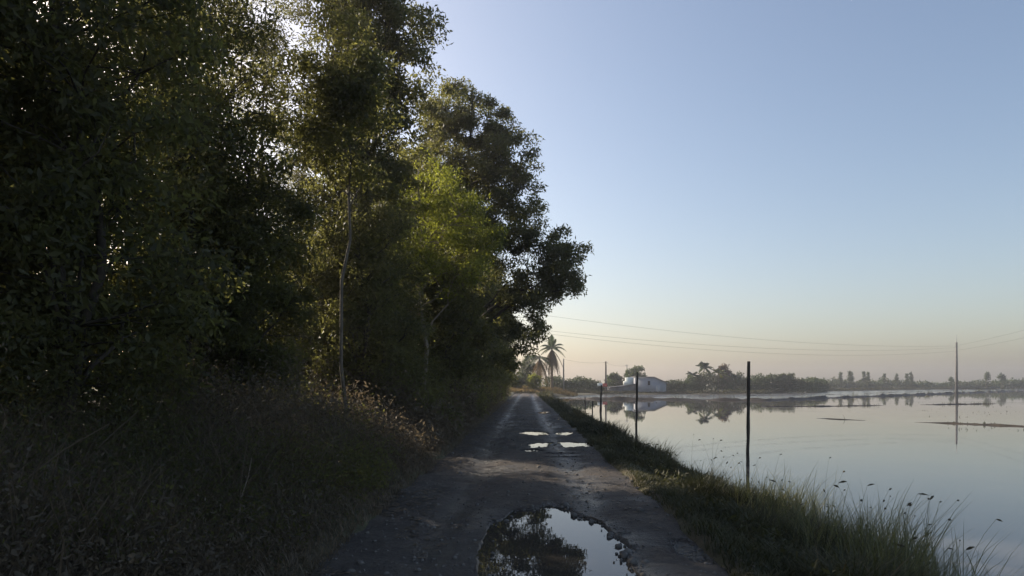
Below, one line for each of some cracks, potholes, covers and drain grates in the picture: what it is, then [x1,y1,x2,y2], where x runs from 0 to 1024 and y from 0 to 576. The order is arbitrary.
pothole [467,502,642,576]
